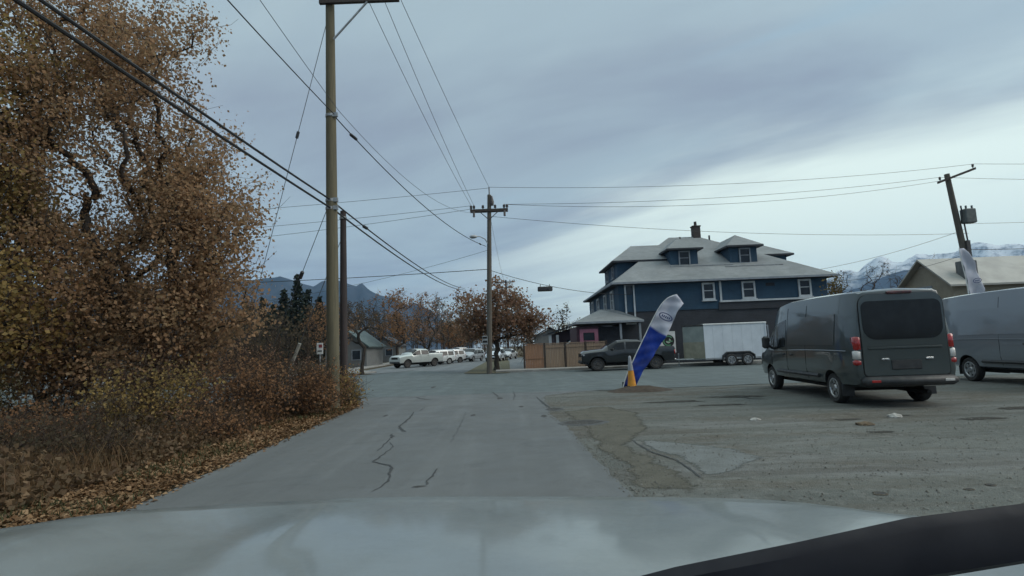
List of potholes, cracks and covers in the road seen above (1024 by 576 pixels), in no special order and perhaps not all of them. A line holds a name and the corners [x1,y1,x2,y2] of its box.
crack [372,407,425,491]
